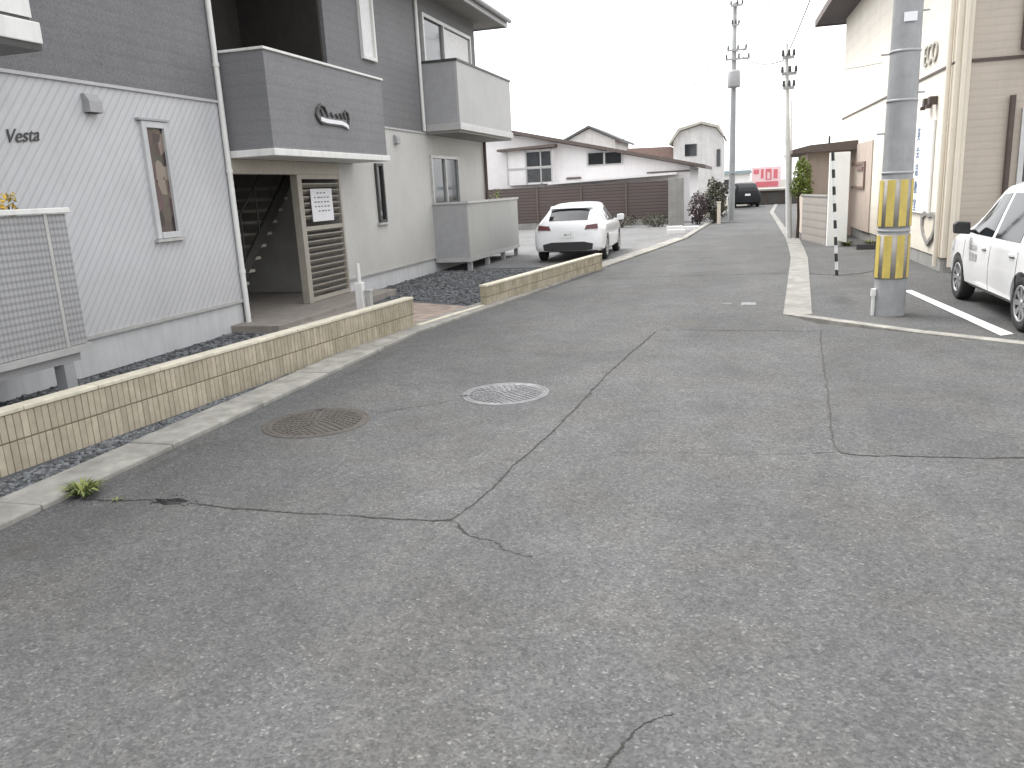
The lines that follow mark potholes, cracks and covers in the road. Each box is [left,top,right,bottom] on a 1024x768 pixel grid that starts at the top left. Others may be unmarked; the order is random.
crack [603,713,674,768]
manhole cover [461,383,549,405]
manhole cover [262,407,371,438]
crack [71,332,655,556]
pothole [149,494,198,506]
